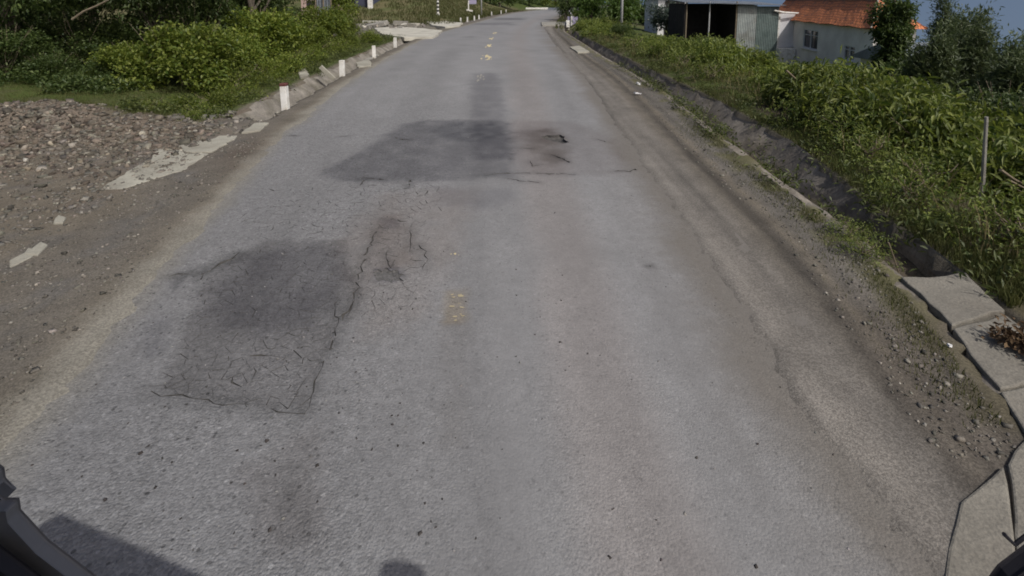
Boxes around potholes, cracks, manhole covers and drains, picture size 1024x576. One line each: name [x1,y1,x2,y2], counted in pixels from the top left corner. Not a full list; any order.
crack [151,178,445,414]
